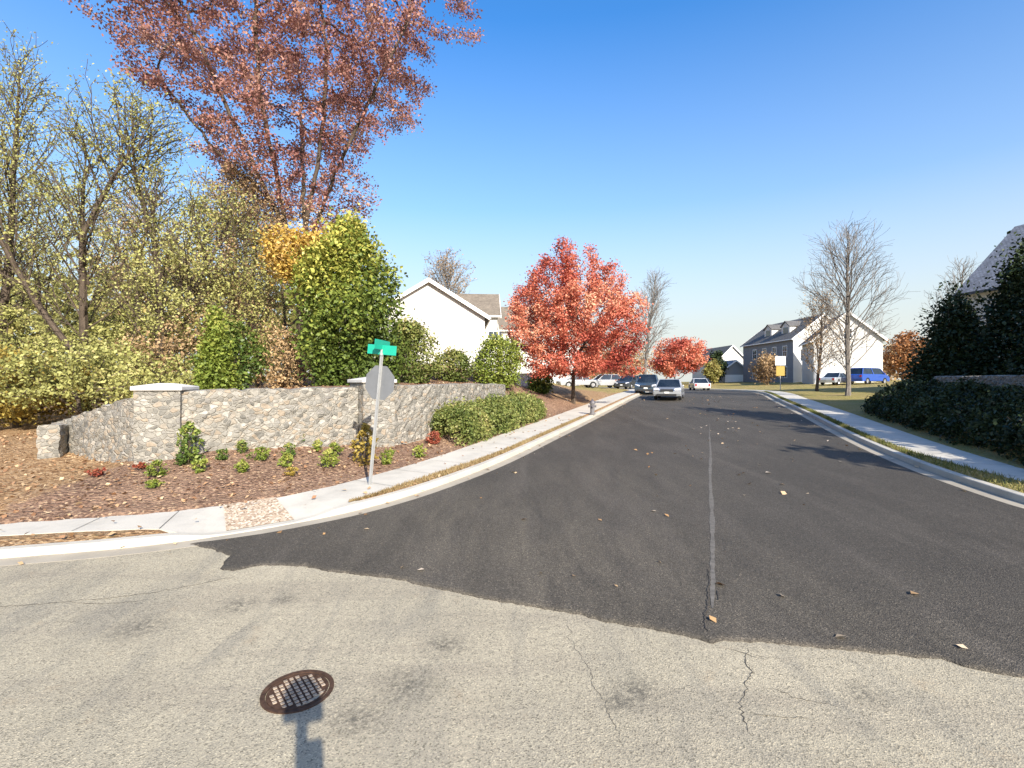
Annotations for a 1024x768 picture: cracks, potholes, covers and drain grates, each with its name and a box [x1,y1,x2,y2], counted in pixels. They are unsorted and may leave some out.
crack [727,648,828,736]
crack [566,627,620,740]
